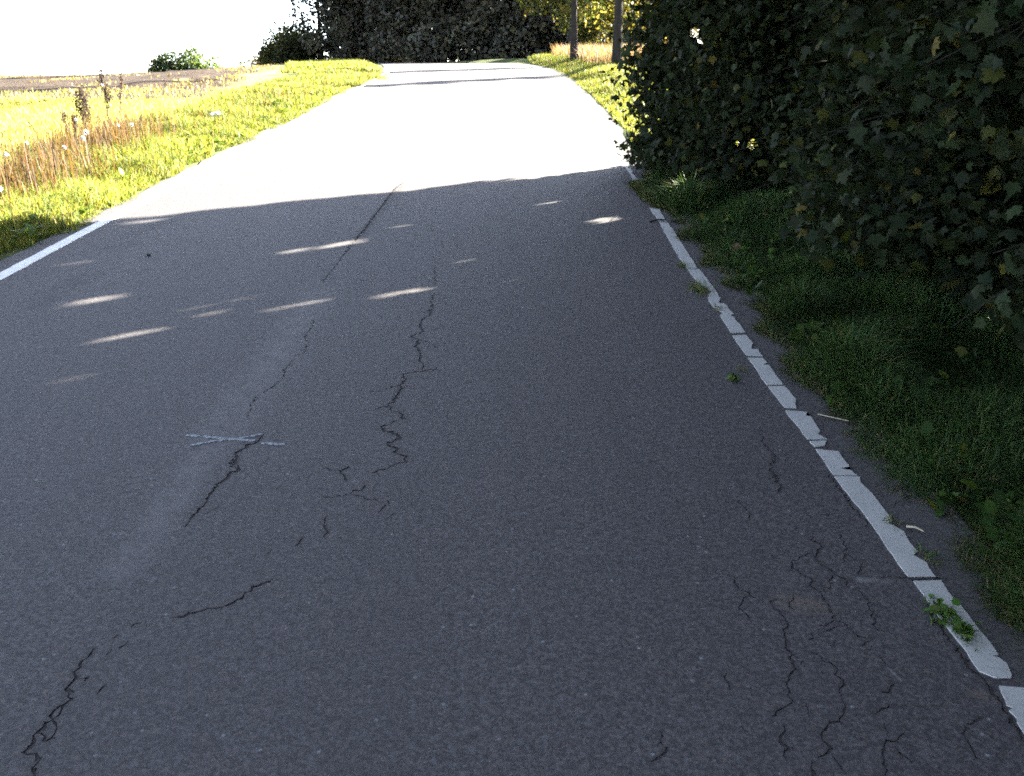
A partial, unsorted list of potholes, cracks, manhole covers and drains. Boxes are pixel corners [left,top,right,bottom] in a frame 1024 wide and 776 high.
crack [759,428,783,492]
crack [322,267,437,519]
crack [247,319,327,417]
crack [21,623,138,776]
crack [185,436,262,527]
crack [172,517,330,618]
crack [929,612,1024,759]
crack [324,183,402,280]
